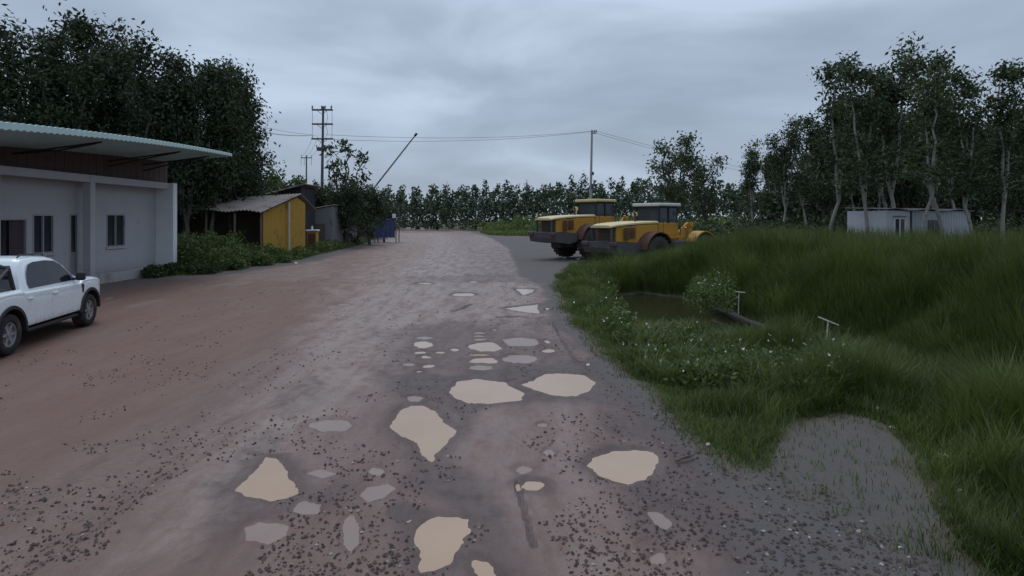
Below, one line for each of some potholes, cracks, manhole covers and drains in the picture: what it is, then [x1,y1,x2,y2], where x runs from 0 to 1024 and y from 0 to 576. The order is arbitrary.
pothole [383,401,462,463]
pothole [514,476,548,491]
pothole [356,480,404,503]
pothole [229,455,306,502]
pothole [500,336,541,346]
pothole [234,515,295,546]
pothole [405,511,478,574]
pothole [305,418,355,432]
pothole [503,303,543,314]
crack [514,486,538,548]
pothole [465,340,507,352]
pothole [443,378,532,404]
